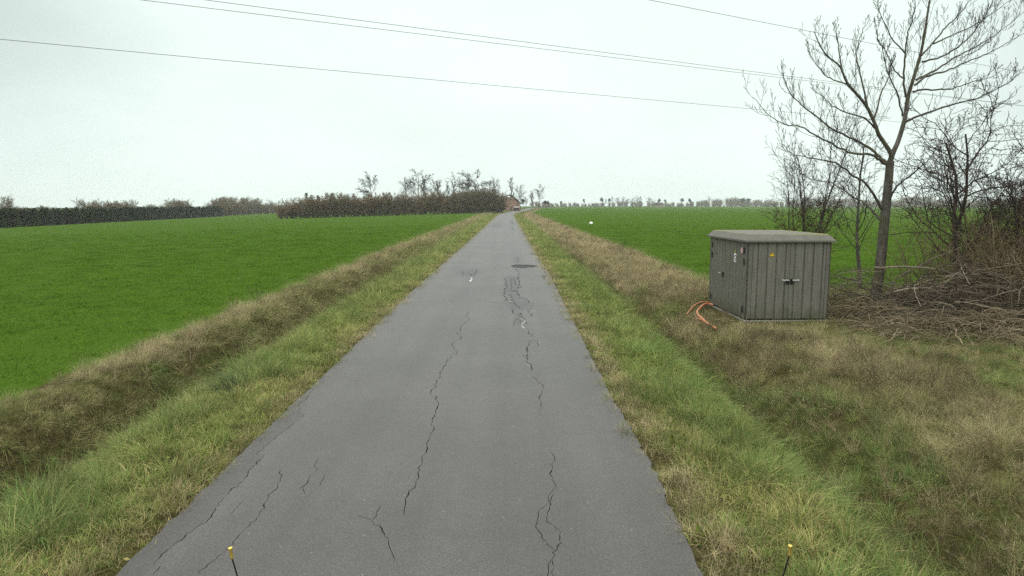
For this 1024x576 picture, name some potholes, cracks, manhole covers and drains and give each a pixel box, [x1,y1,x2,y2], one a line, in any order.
crack [535,454,561,576]
crack [503,260,544,413]
crack [153,385,317,575]
crack [404,312,470,512]
